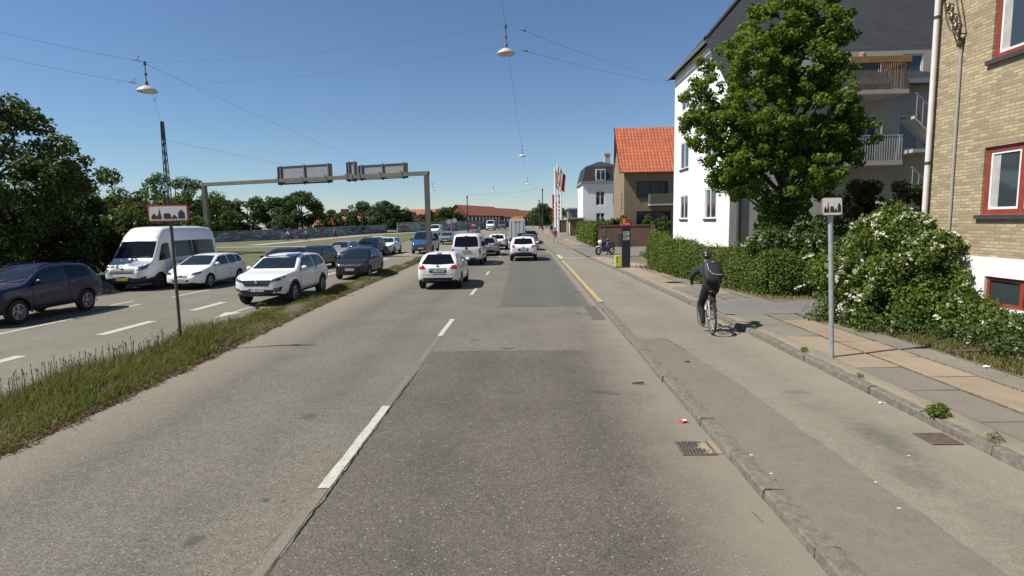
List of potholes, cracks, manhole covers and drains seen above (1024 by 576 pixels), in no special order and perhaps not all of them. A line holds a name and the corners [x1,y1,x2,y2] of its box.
drain grate [674,440,723,456]
